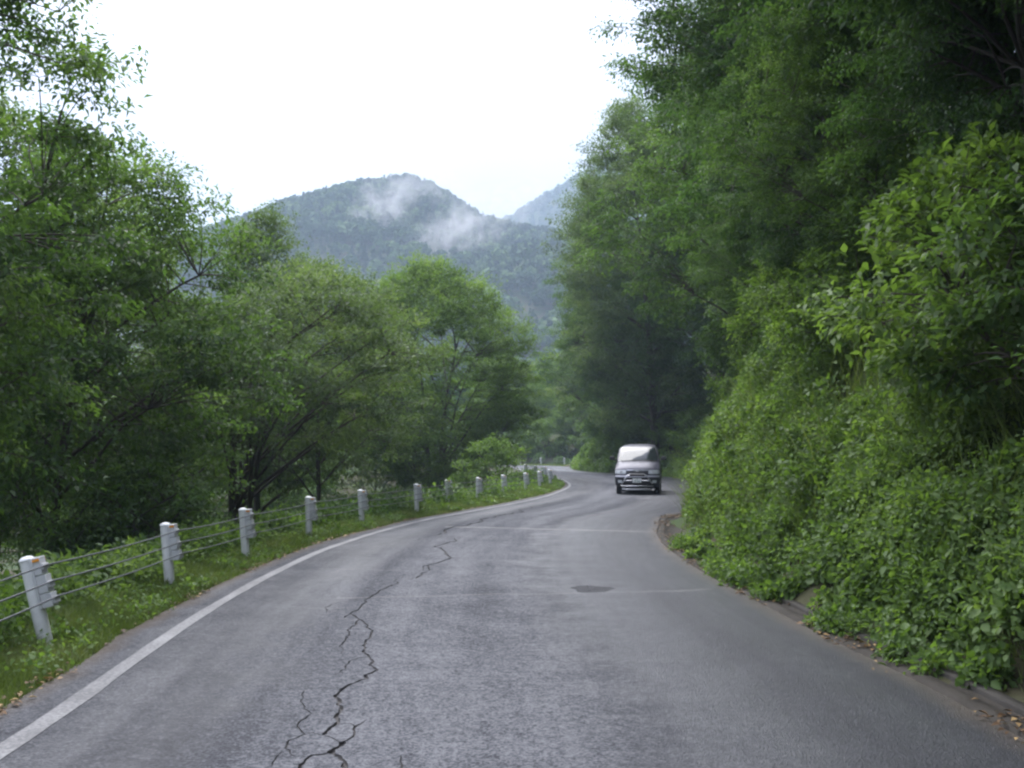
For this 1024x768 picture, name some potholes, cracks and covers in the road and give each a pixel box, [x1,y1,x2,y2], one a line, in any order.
crack [271,498,565,768]
